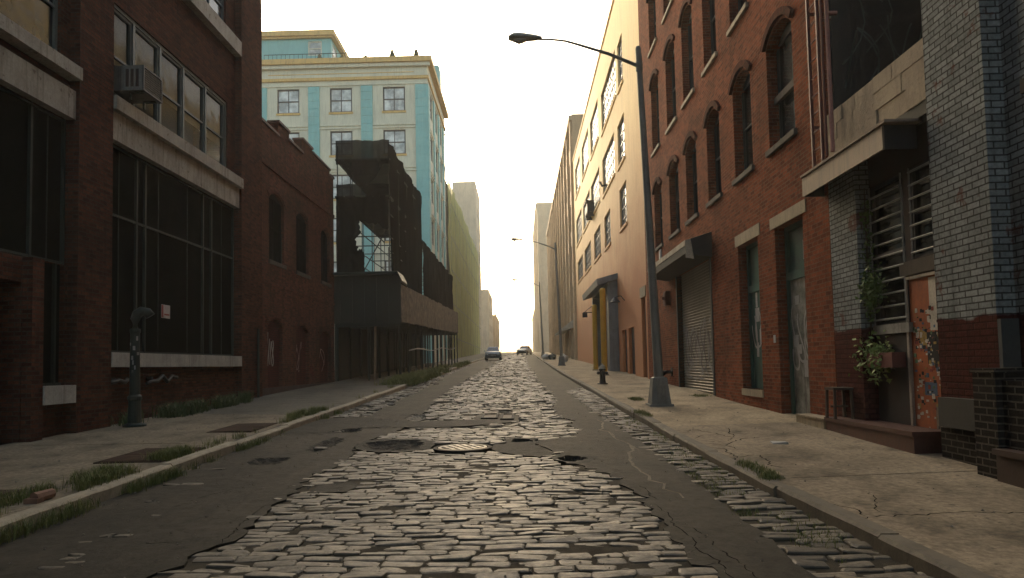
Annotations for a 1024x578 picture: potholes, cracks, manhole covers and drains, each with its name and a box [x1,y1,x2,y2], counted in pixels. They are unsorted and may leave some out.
crack [598,420,757,578]
crack [689,428,778,467]
utility cover [206,423,278,433]
manhole cover [433,444,492,455]
pothole [246,457,291,466]
utility cover [93,447,205,464]
pothole [306,437,344,452]
pothole [361,440,424,451]
